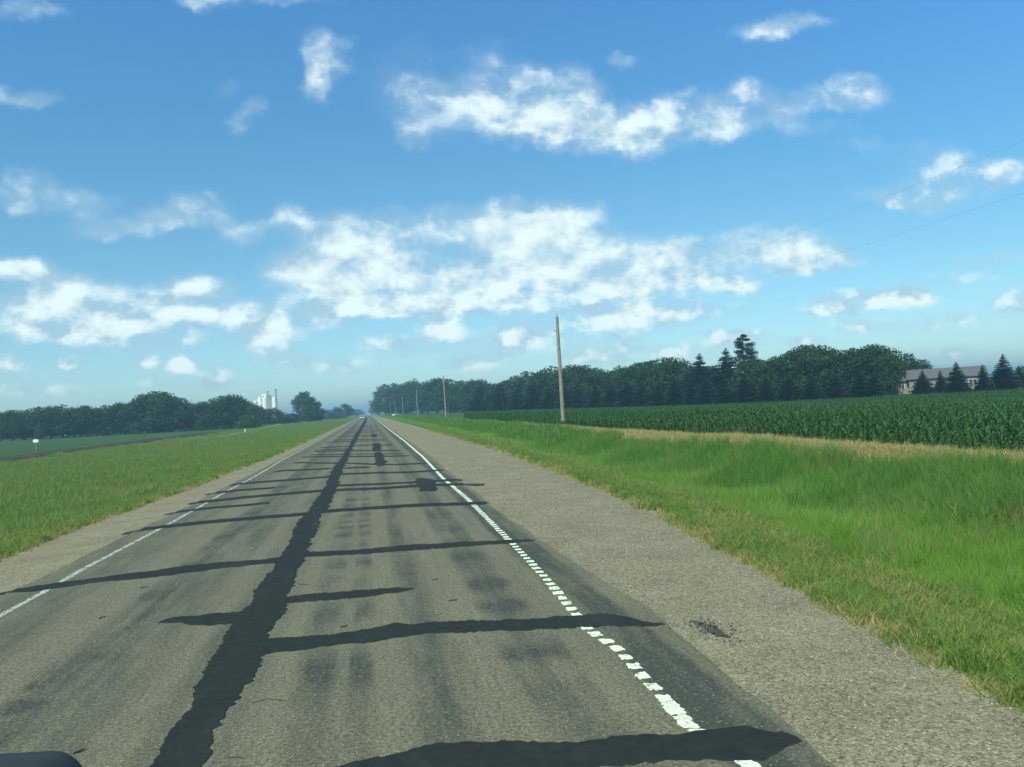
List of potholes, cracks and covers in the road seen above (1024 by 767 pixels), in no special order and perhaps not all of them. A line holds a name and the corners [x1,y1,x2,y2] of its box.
pothole [683,617,751,642]
